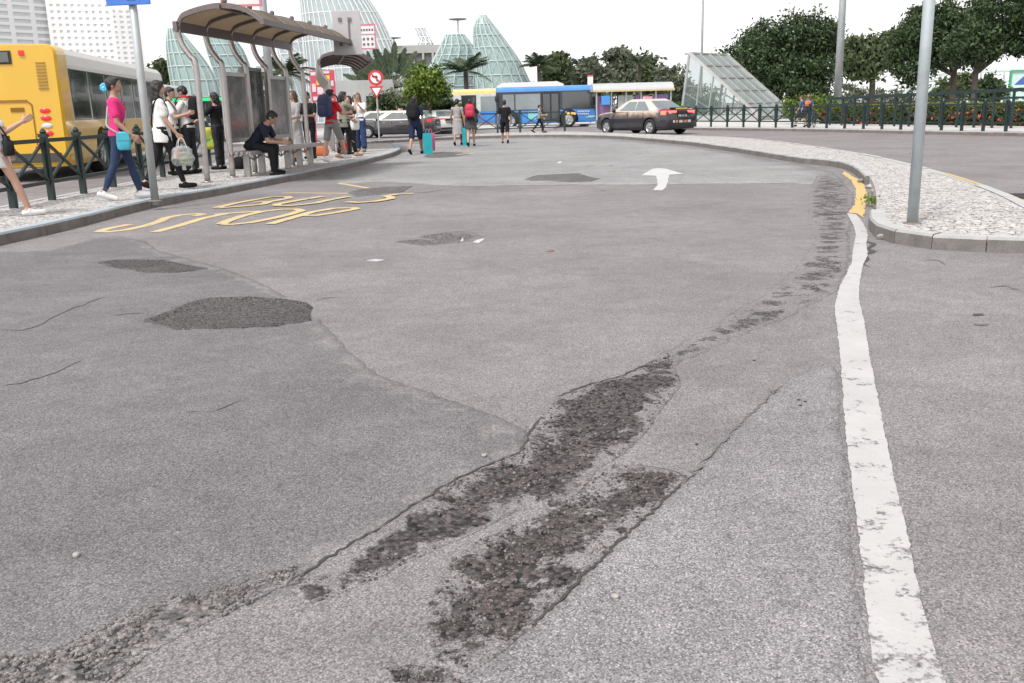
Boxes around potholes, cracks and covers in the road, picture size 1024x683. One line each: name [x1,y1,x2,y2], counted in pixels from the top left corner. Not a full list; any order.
pothole [0,566,303,683]
crack [286,416,541,585]
crack [0,359,83,386]
crack [6,296,142,330]
crack [531,385,782,628]
pothole [381,664,462,683]
pothole [291,360,681,604]
pothole [420,465,689,675]
